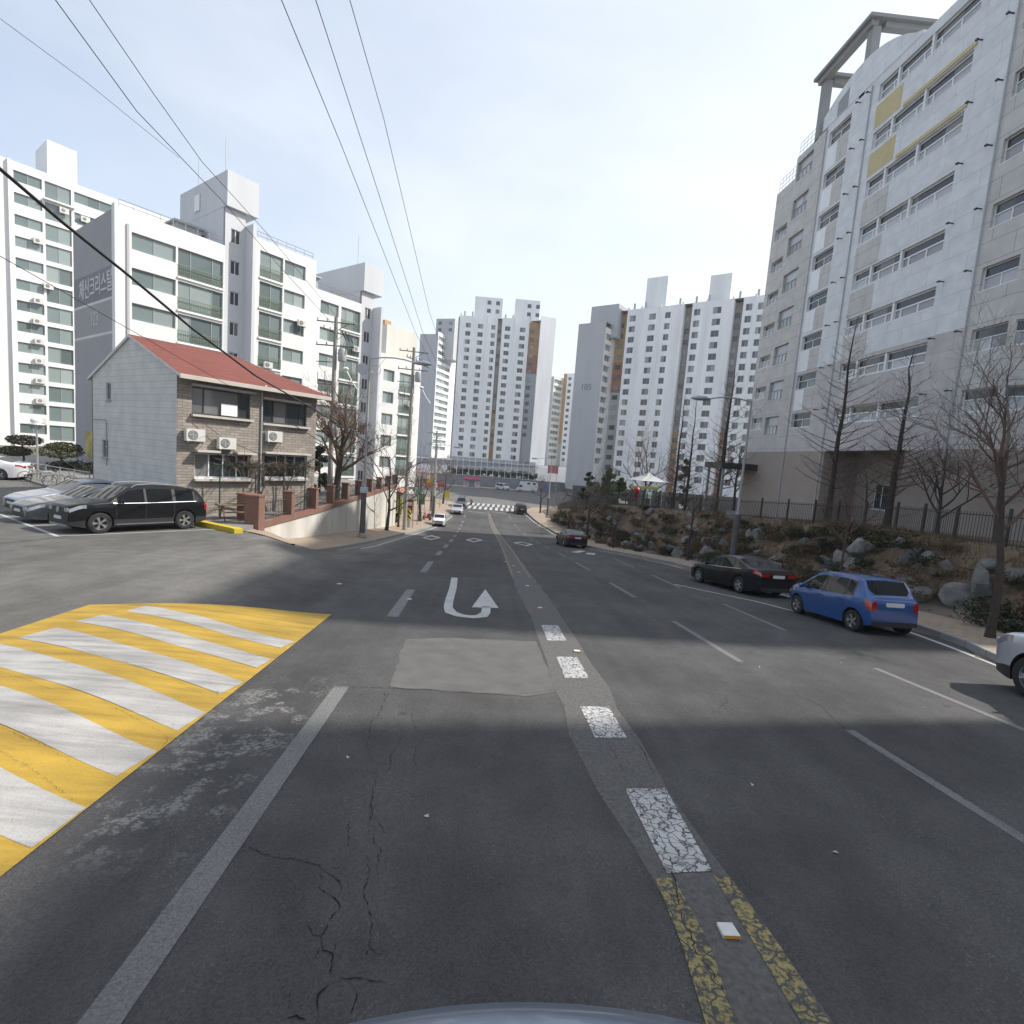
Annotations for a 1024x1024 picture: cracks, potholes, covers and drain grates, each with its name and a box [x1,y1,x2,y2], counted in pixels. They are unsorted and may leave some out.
crack [347,694,401,955]
